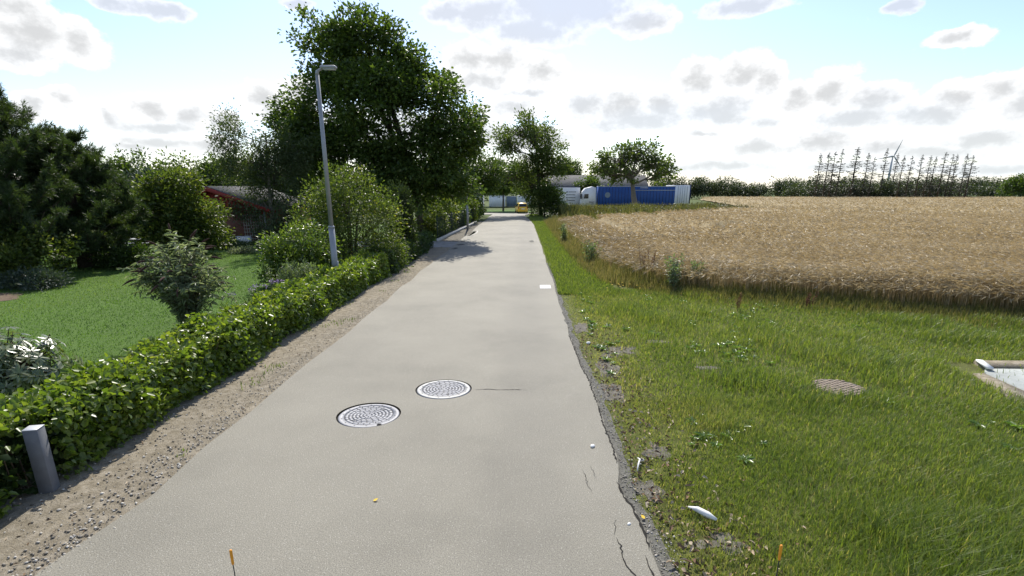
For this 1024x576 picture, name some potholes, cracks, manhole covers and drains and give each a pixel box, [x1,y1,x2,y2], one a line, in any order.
crack [569,336,617,485]
manhole cover [336,404,401,428]
crack [614,482,655,576]
manhole cover [415,380,472,399]
